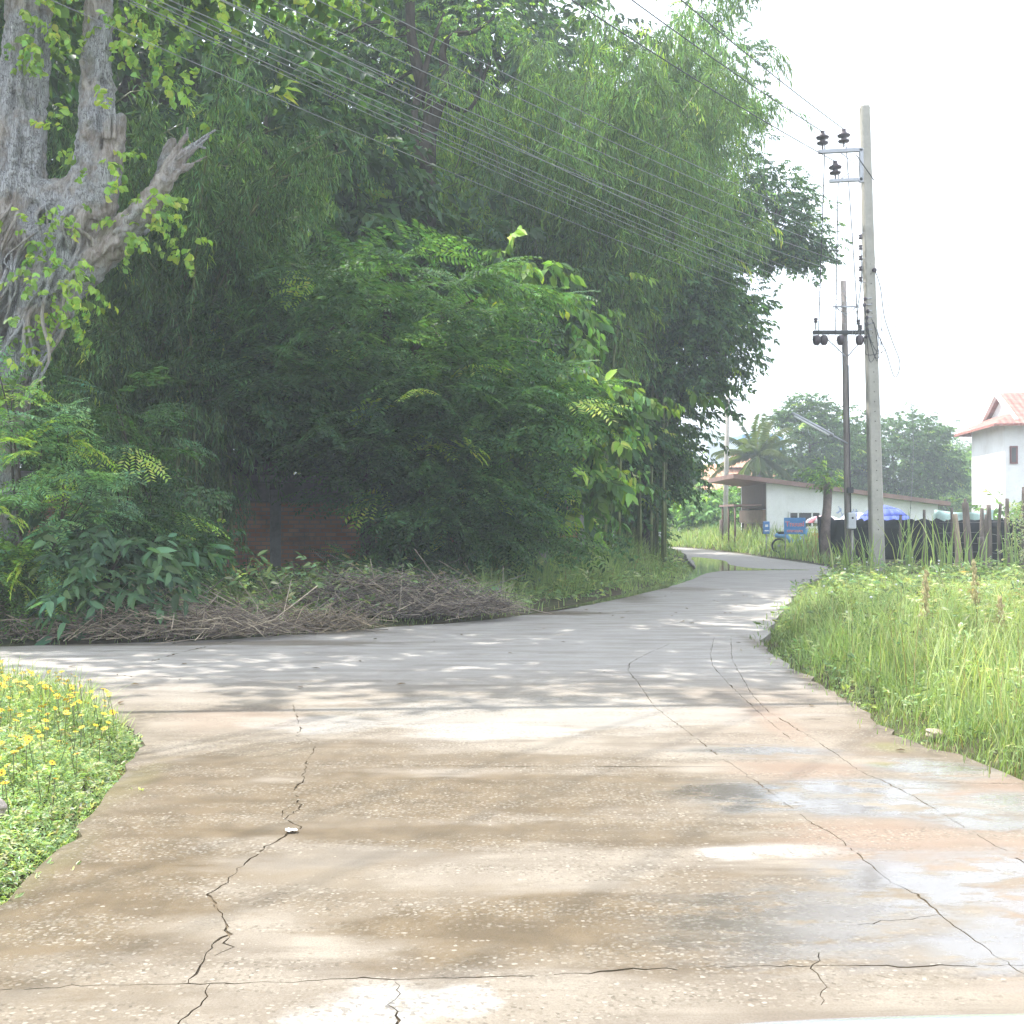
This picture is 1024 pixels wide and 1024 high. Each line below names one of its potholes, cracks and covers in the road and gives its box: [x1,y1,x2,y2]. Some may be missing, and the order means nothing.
crack [8,705,1015,1024]
